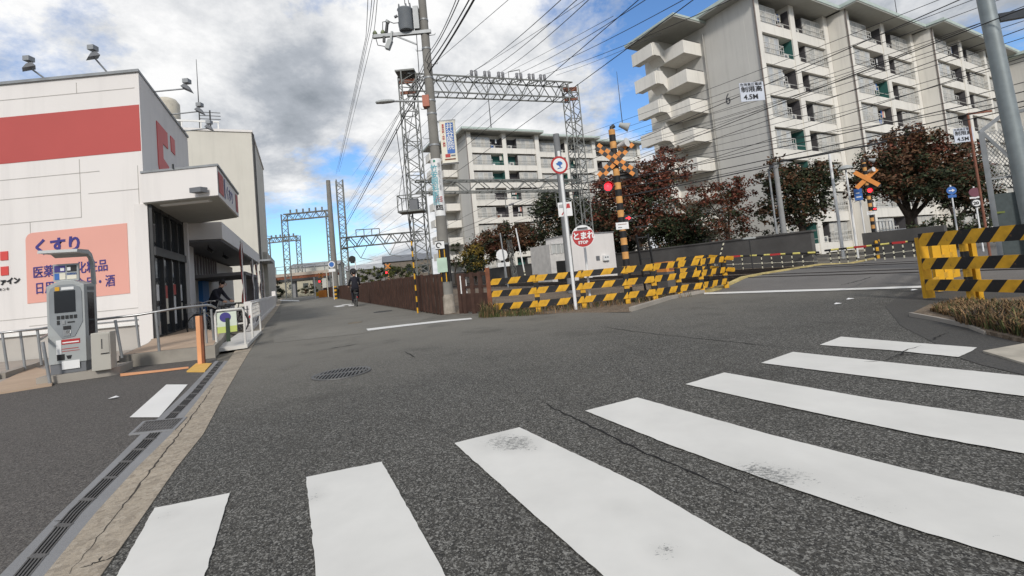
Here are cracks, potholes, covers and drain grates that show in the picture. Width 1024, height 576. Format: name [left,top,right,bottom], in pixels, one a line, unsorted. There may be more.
crack [541,400,756,499]
drain grate [129,417,187,436]
manhole cover [311,366,371,381]
